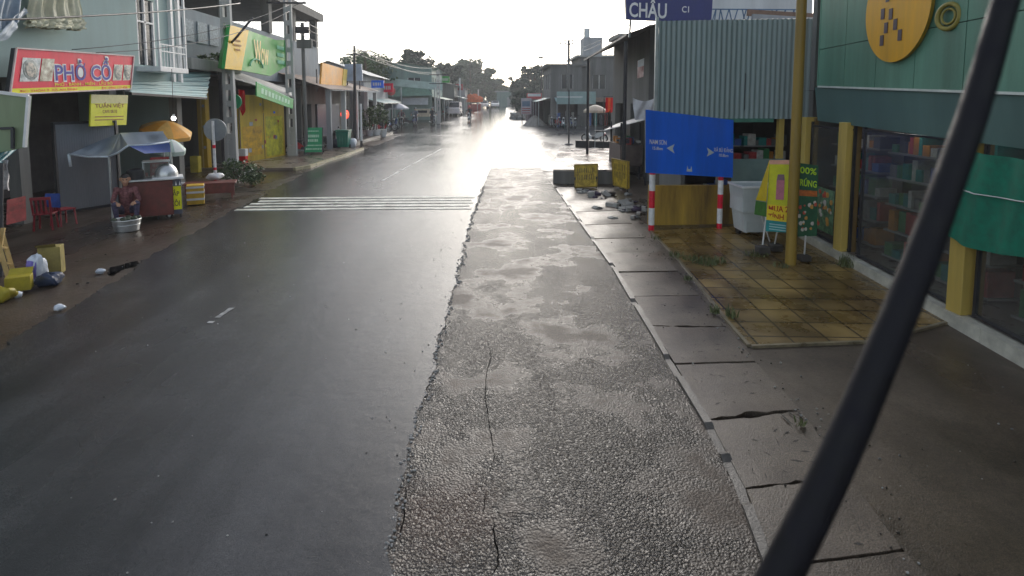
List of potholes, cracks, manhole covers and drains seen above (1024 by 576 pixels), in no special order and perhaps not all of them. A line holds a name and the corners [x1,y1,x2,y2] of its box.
crack [485,348,495,473]
